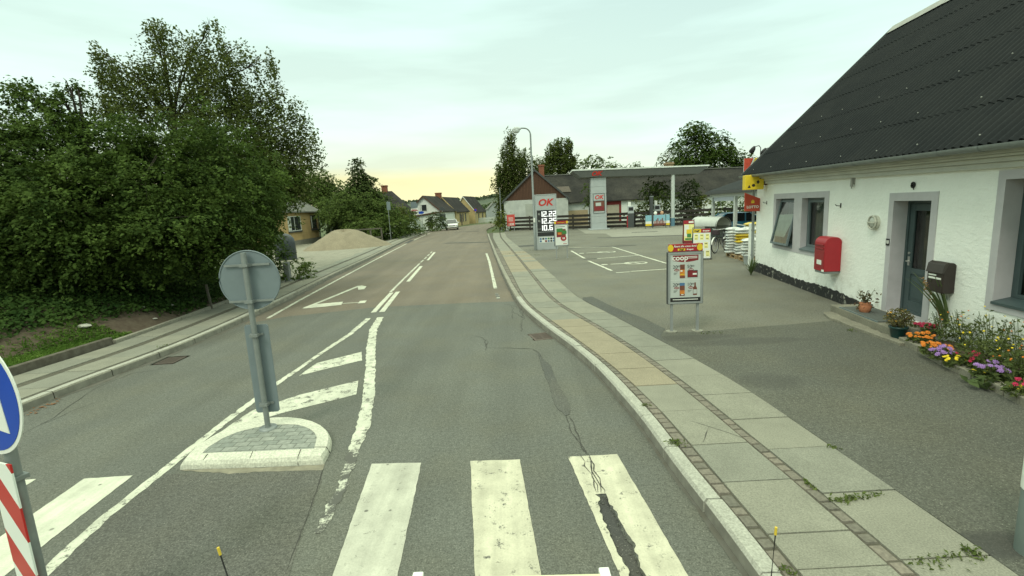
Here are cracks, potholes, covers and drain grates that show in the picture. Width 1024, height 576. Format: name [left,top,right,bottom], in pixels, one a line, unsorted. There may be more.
crack [566,414,605,490]
pothole [597,494,646,576]
